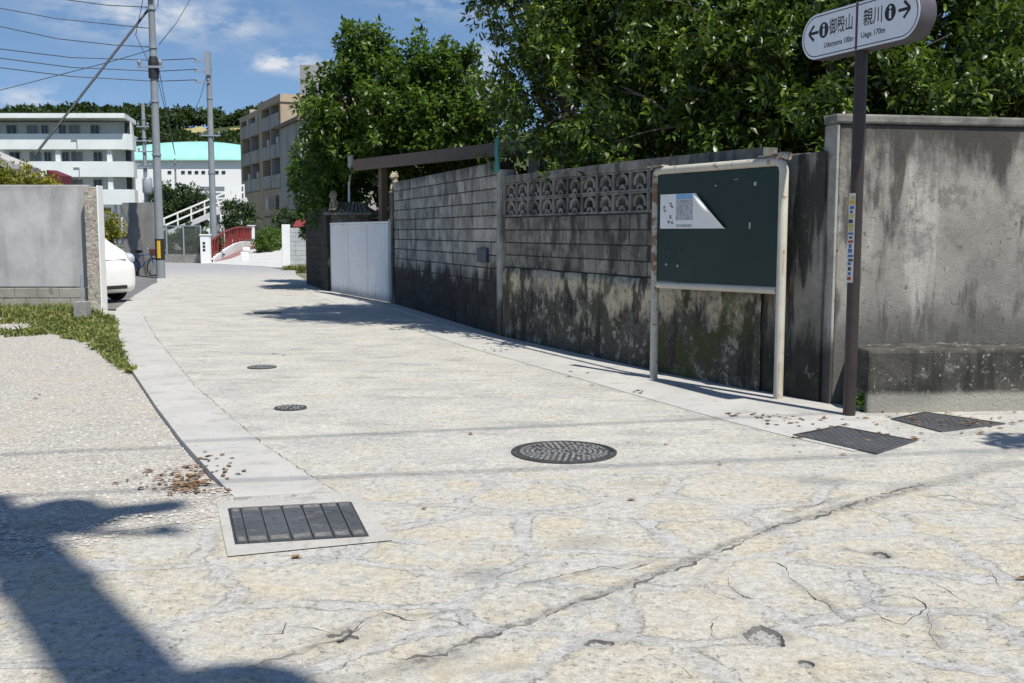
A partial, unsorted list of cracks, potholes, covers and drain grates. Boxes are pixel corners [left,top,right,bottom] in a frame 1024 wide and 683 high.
pothole [743,625,785,649]
pothole [797,660,815,669]
crack [254,480,1019,667]
manhole cover [511,441,617,464]
